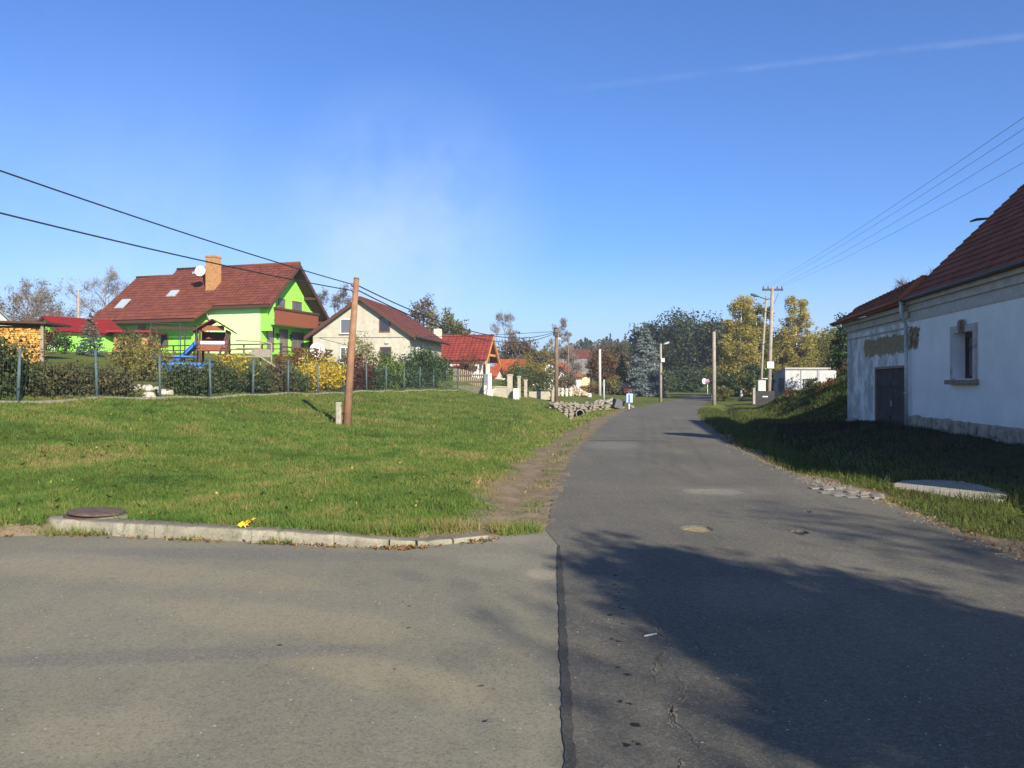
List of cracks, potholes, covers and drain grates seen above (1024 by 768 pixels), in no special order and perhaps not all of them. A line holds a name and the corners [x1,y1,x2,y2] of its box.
manhole cover [47,507,128,533]
crack [650,616,705,768]
